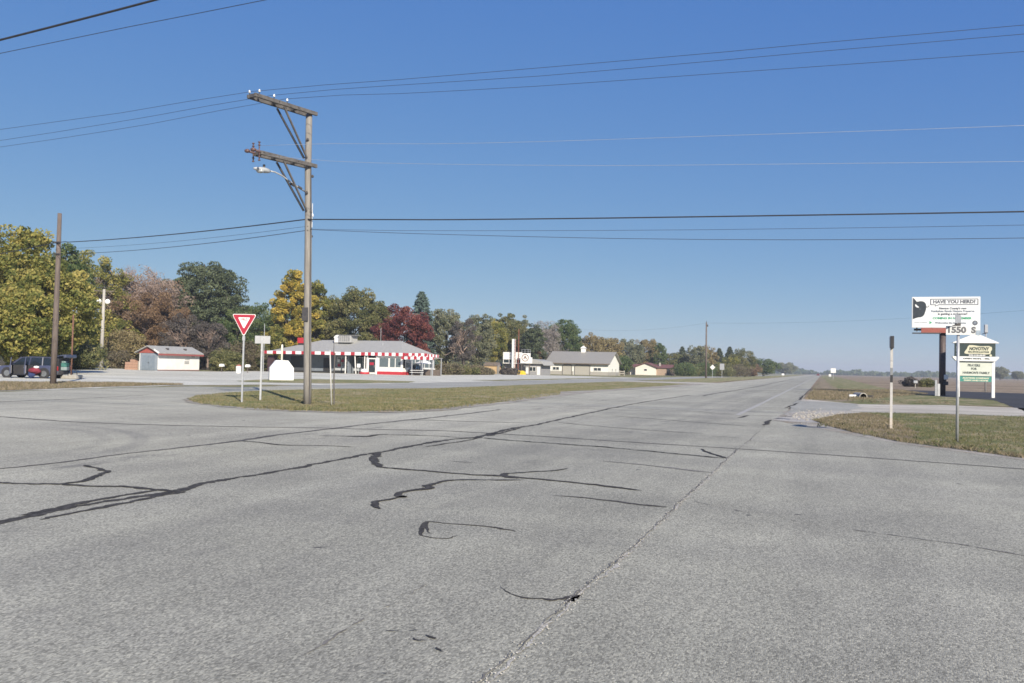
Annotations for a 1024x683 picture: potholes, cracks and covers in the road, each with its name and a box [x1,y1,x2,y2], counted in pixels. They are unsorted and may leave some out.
crack [501,587,602,601]
crack [299,583,427,657]
